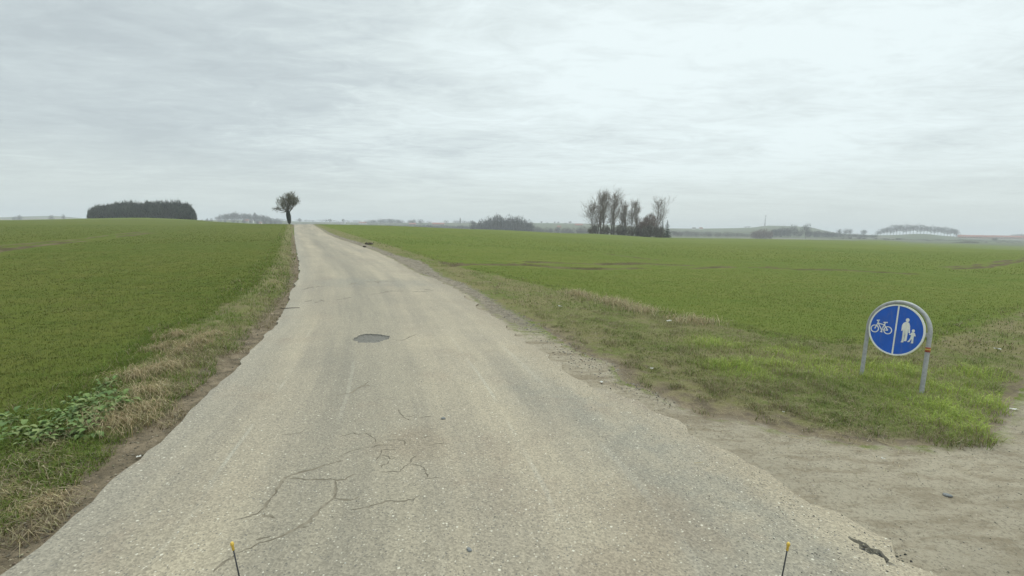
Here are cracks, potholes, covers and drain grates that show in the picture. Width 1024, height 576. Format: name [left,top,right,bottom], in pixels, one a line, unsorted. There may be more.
pothole [353,334,389,343]
crack [213,433,442,573]
